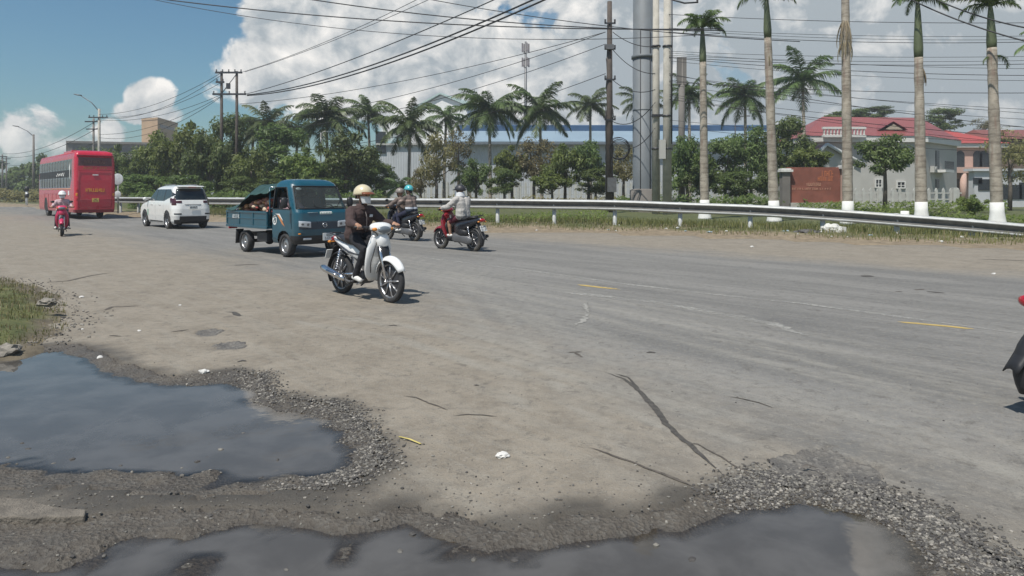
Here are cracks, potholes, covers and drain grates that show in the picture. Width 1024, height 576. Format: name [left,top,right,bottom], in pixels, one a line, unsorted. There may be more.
pothole [0,484,1021,576]
crack [403,395,491,416]
pothole [0,343,384,500]
pothole [763,448,888,493]
crack [589,443,753,487]
